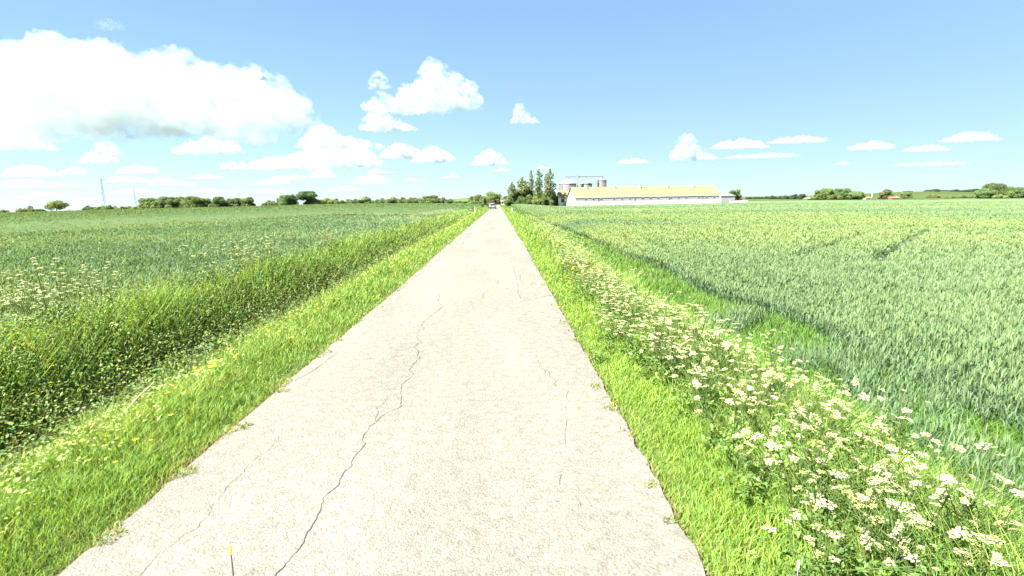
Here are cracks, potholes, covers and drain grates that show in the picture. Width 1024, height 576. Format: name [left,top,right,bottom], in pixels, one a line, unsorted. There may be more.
crack [140,437,279,575]
crack [274,296,442,576]
